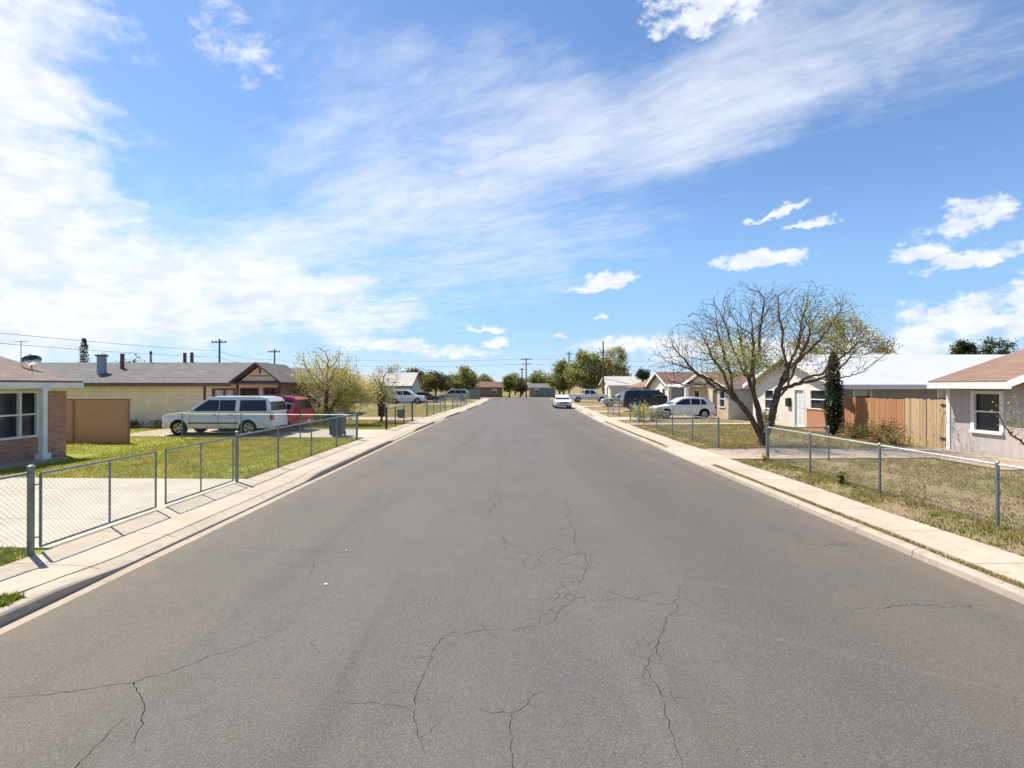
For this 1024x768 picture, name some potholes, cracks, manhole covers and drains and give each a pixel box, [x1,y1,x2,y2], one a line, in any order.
crack [4,630,282,768]
crack [342,504,615,755]
crack [481,690,544,768]
crack [604,588,698,766]
